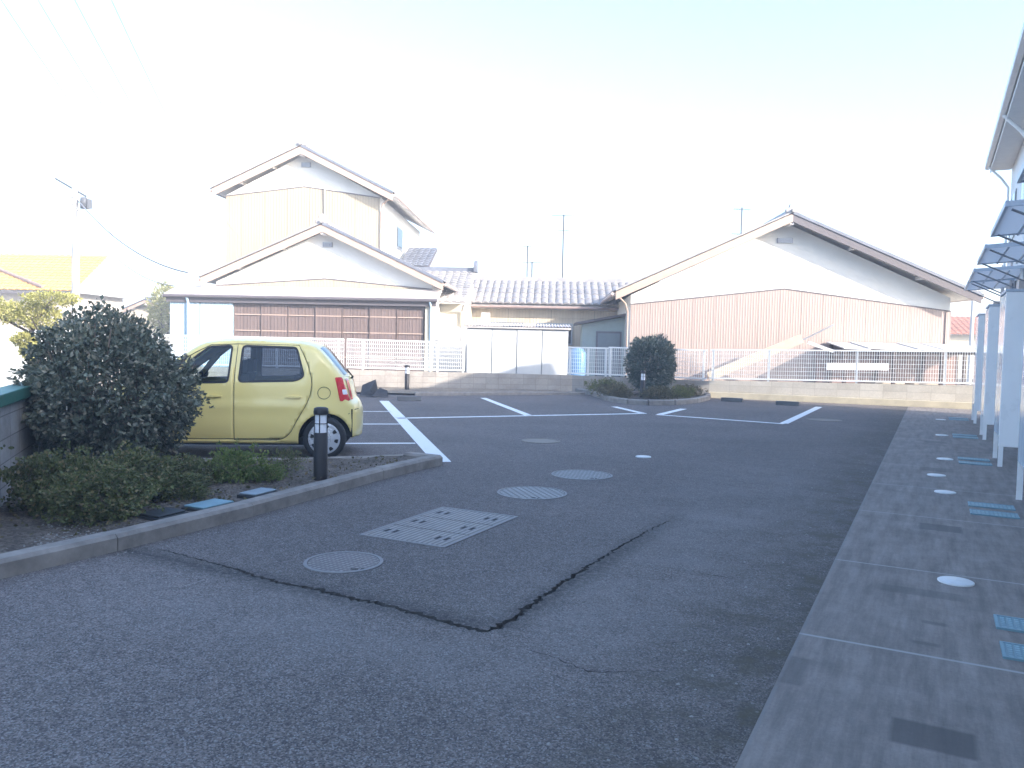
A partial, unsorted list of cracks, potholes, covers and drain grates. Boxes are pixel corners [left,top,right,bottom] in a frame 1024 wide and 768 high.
manhole cover [303,551,383,574]
crack [157,521,669,632]
manhole cover [497,486,567,500]
crack [527,649,663,673]
manhole cover [551,470,613,480]
